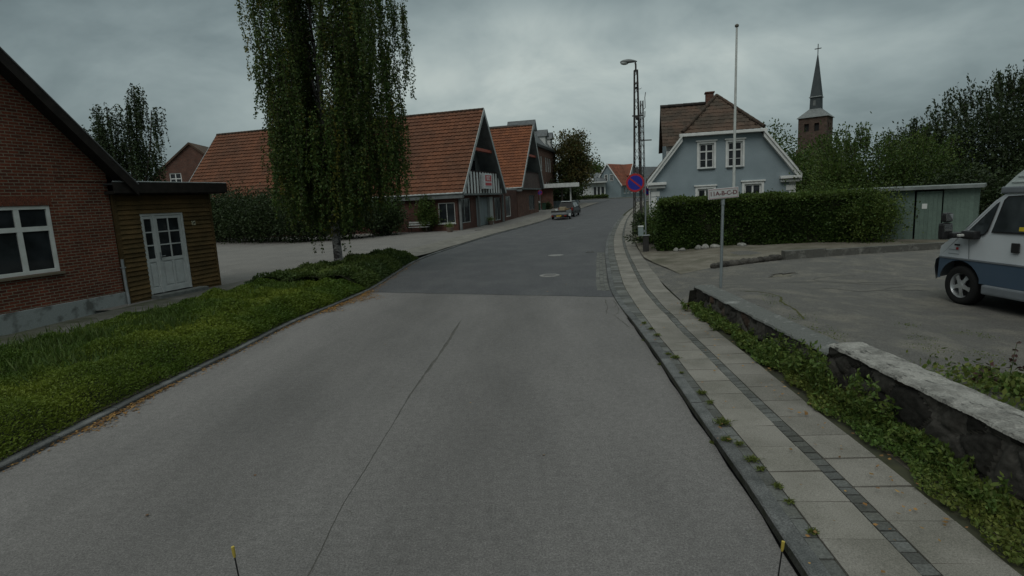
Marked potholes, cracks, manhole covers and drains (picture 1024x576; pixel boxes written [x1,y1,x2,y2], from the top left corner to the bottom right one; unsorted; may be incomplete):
crack [752,291,804,318]
